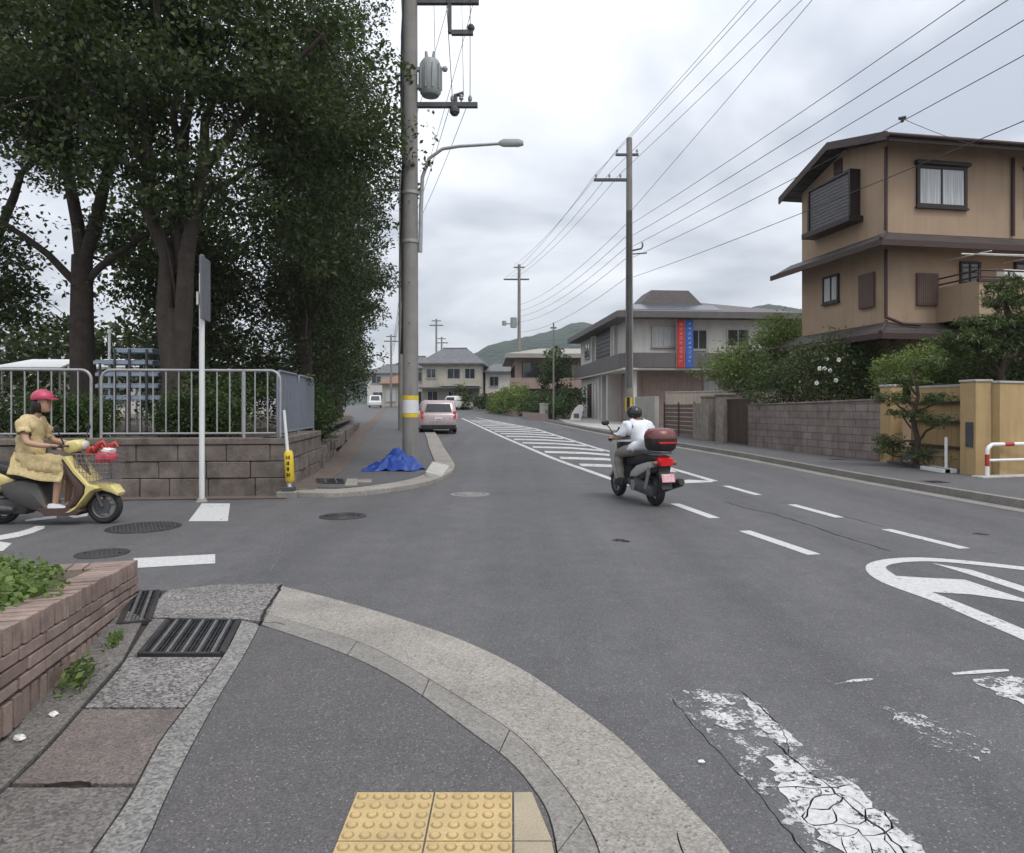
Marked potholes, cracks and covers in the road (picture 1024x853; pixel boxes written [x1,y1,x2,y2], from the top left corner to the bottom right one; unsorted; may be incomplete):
drain grate [137,618,242,657]
manhole cover [319,512,366,520]
crack [257,526,290,626]
crack [672,692,905,853]
manhole cover [73,548,130,559]
drain grate [116,590,161,625]
manhole cover [104,521,182,534]
